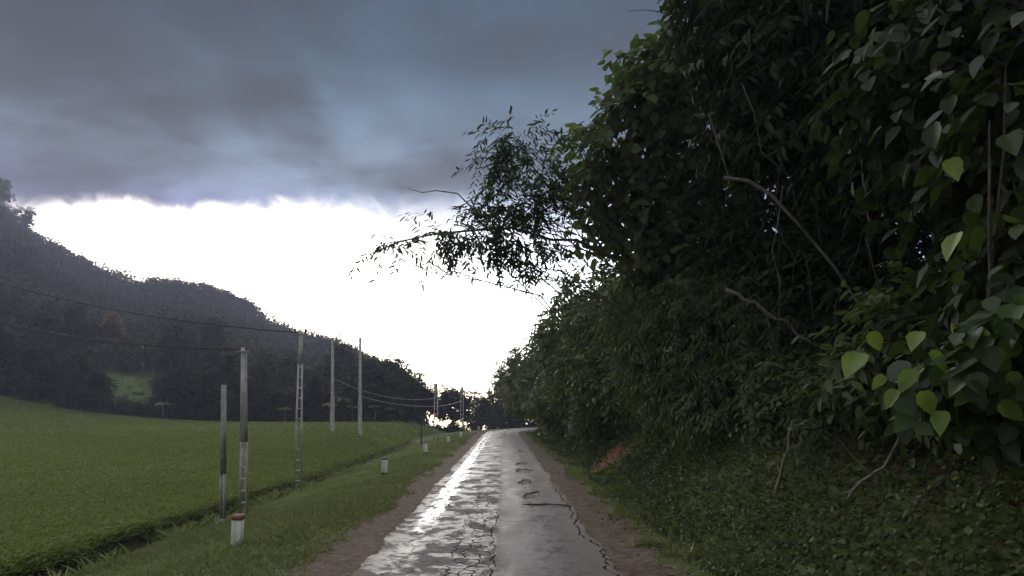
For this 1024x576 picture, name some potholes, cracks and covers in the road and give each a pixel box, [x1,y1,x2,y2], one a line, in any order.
crack [548,483,620,576]
crack [372,478,520,576]
